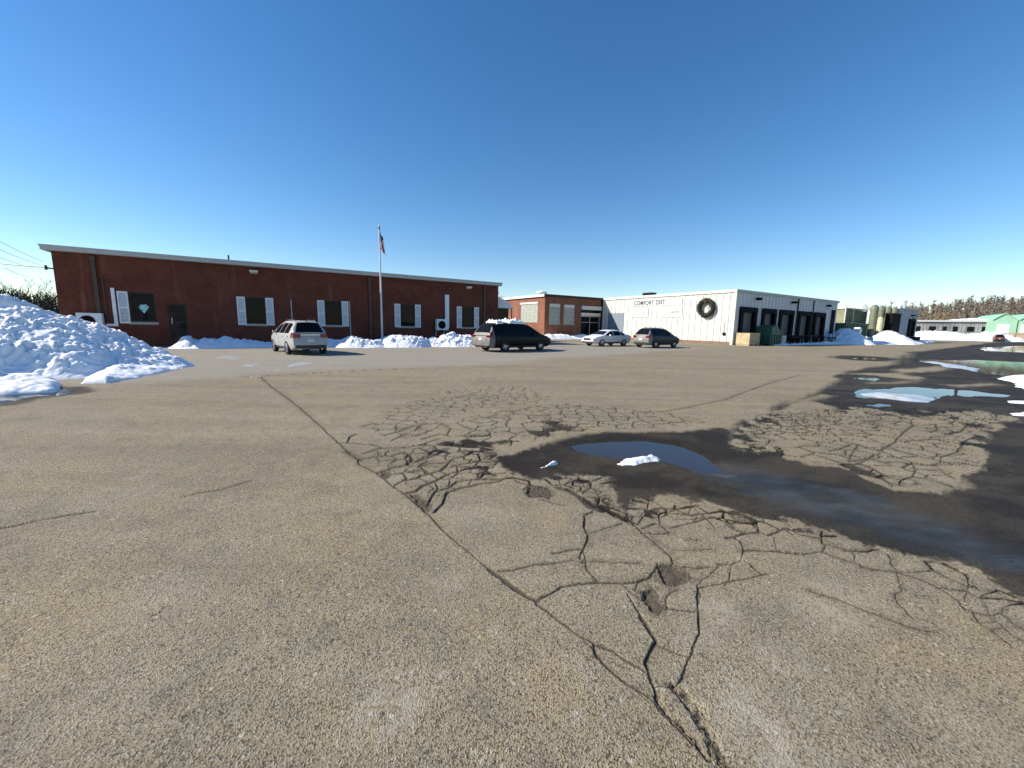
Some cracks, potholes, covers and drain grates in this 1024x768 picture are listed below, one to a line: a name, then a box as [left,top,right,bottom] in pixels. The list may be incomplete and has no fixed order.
pothole [639,588,667,615]
crack [268,384,1024,768]
pothole [655,564,691,587]
pothole [525,486,555,500]
